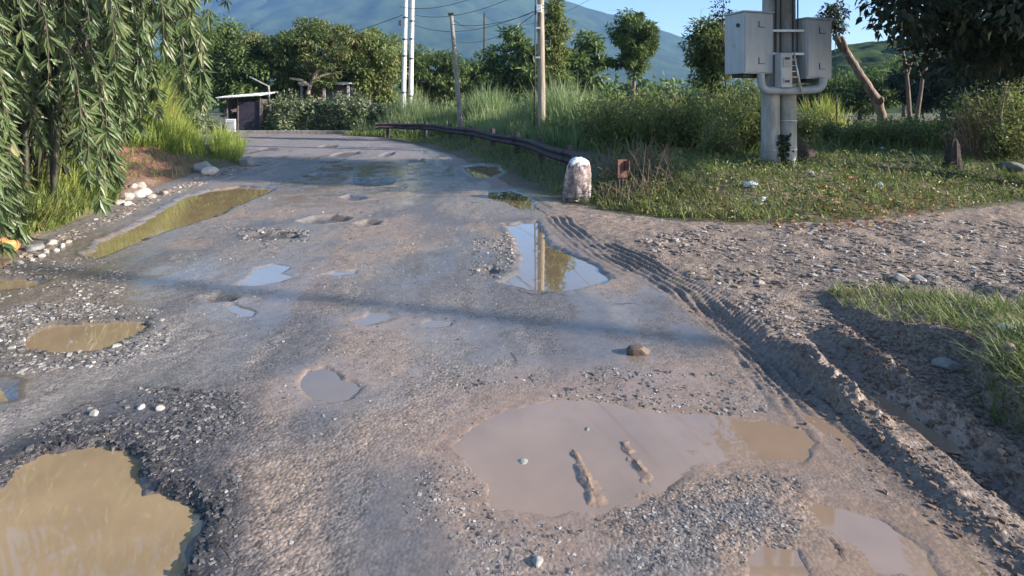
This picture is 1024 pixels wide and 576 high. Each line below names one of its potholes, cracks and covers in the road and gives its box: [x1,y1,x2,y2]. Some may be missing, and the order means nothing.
pothole [726,536,824,576]
pothole [0,428,236,576]
pothole [459,163,507,178]
pothole [212,300,264,319]
pothole [283,359,378,408]
pothole [783,487,969,576]
pothole [481,189,543,211]
pothole [486,218,624,294]
pothole [291,213,356,225]
pothole [73,185,281,261]
pothole [339,176,400,188]
